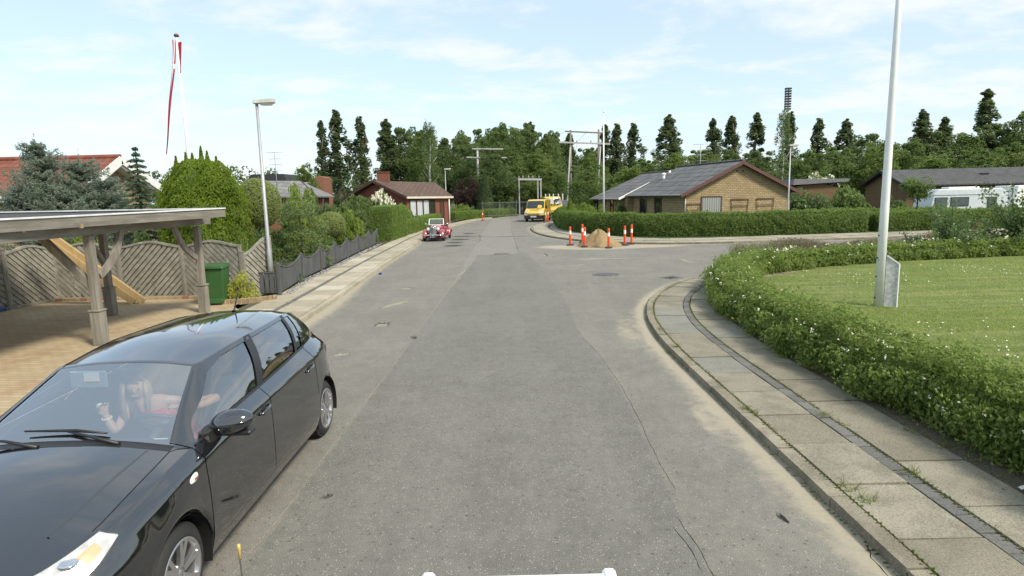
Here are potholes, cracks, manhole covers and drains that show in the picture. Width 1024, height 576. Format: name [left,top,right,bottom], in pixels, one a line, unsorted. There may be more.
crack [675,517,714,576]
crack [579,318,675,489]
